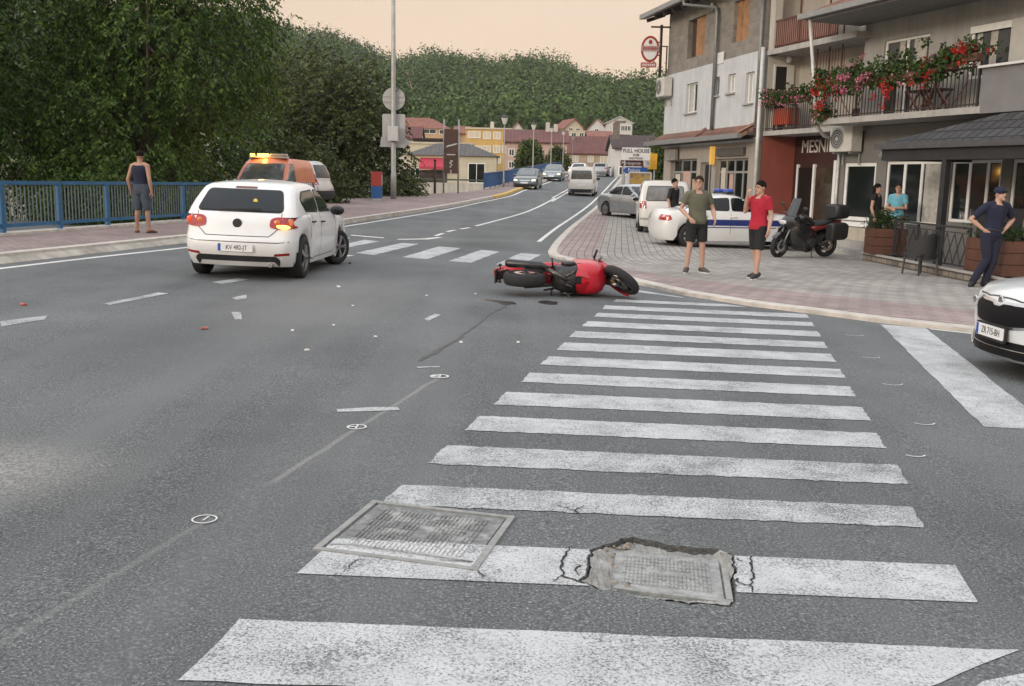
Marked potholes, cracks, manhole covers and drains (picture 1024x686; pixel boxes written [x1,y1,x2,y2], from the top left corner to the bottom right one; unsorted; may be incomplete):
crack [554,546,590,585]
manhole cover [312,500,515,571]
crack [735,556,755,592]
manhole cover [613,552,734,607]
